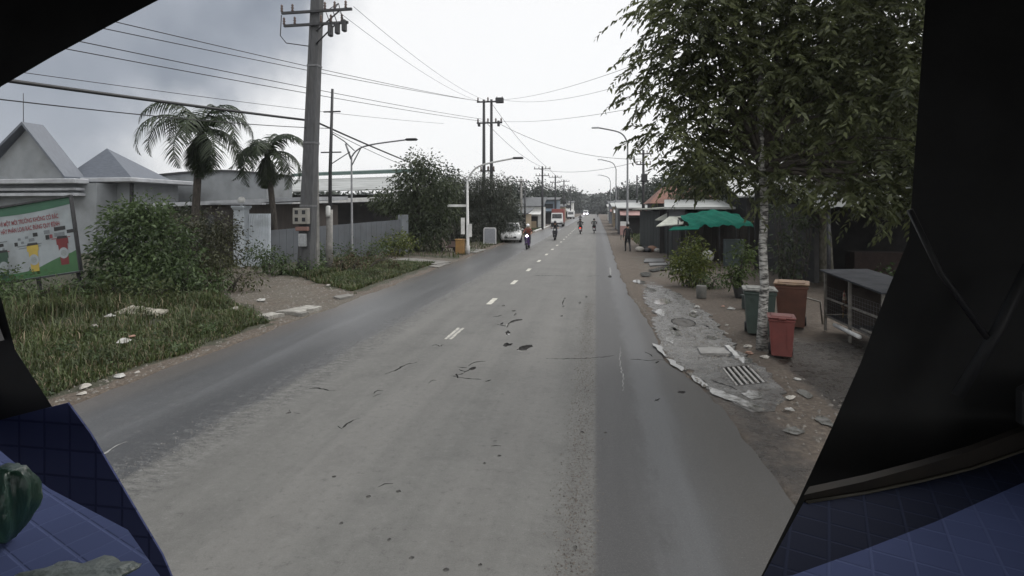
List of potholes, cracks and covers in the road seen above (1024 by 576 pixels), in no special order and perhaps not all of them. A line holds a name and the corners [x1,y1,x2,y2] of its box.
crack [454,361,490,382]
drain grate [721,365,767,386]
manhole cover [671,318,696,327]
